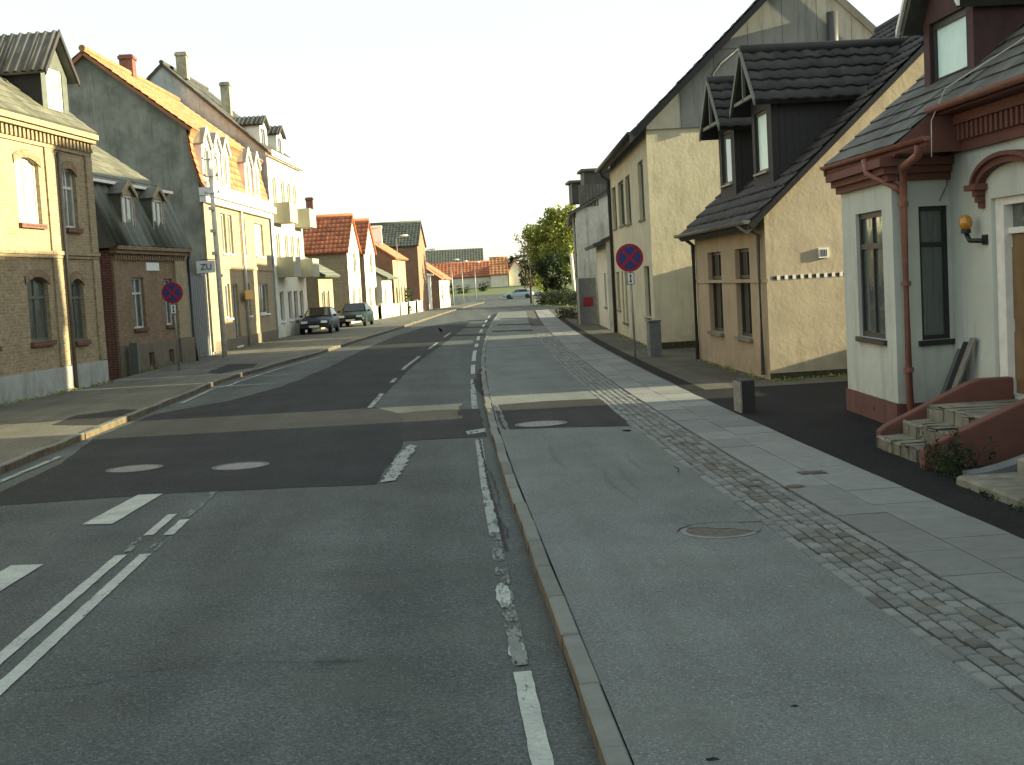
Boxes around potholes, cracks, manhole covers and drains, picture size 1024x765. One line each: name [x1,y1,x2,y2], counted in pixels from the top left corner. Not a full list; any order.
manhole cover [211,462,270,471]
manhole cover [105,464,163,473]
manhole cover [681,522,760,539]
